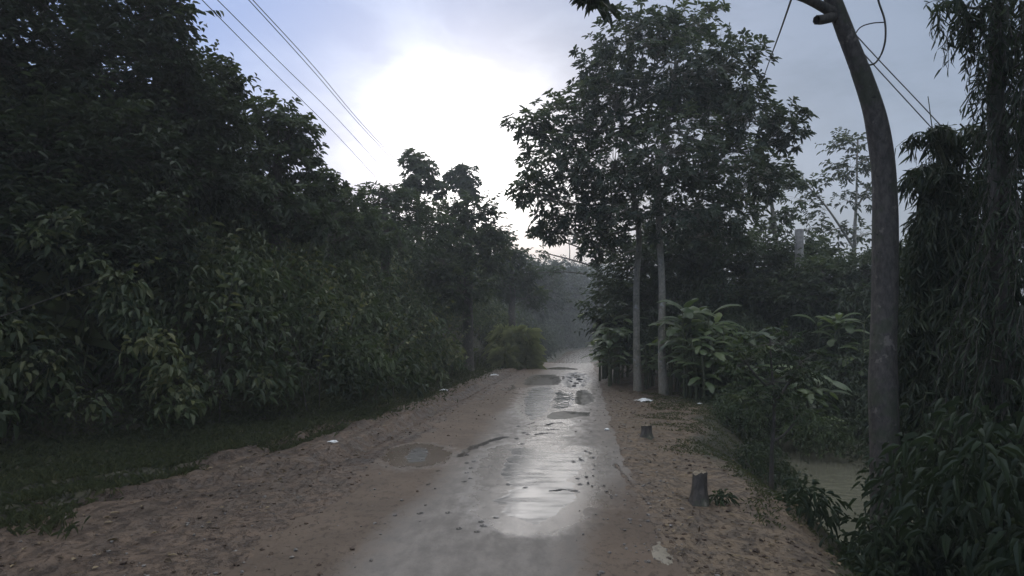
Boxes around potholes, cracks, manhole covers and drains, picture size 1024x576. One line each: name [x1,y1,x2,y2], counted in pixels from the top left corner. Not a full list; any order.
crack [453,436,509,457]
pothole [552,390,574,409]
pothole [546,411,590,419]
pothole [523,374,562,385]
pothole [574,390,595,405]
